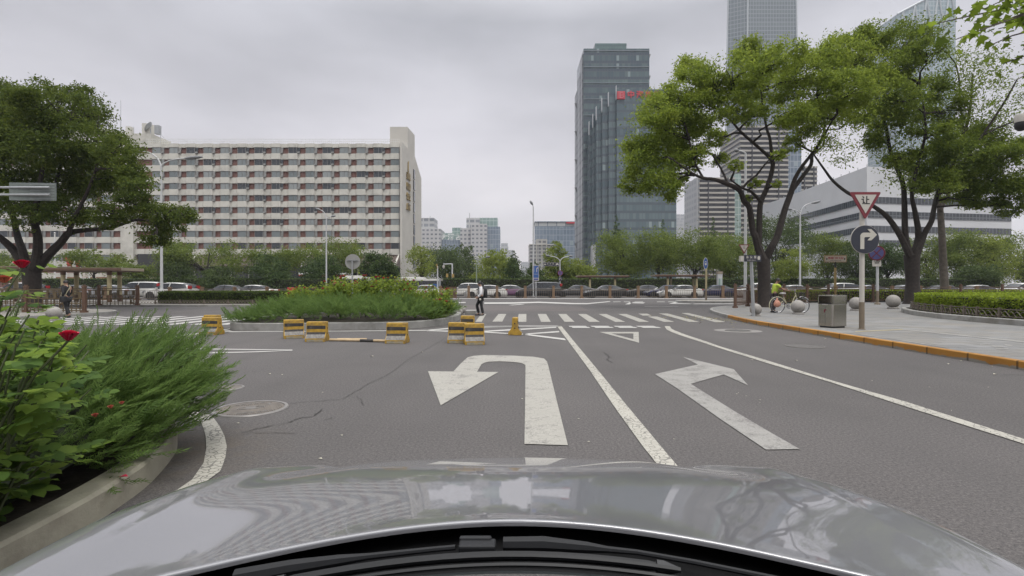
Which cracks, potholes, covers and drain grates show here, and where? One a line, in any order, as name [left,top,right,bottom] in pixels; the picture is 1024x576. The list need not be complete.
crack [248,340,441,433]
manhole cover [211,400,289,417]
